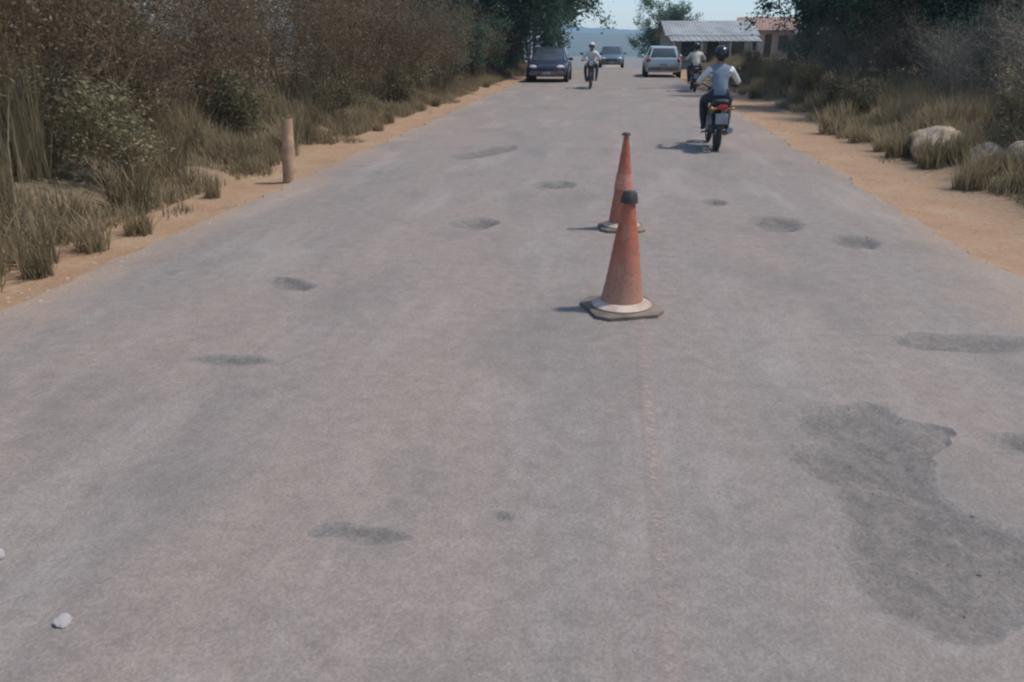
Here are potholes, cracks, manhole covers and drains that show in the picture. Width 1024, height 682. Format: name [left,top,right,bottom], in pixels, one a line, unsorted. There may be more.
pothole [529,180,577,189]
pothole [264,276,319,291]
pothole [747,216,807,233]
pothole [447,145,518,160]
pothole [188,354,275,367]
pothole [890,332,1024,355]
pothole [491,510,516,523]
pothole [307,521,413,547]
pothole [448,217,501,231]
pothole [827,235,885,249]
pothole [700,198,729,206]
